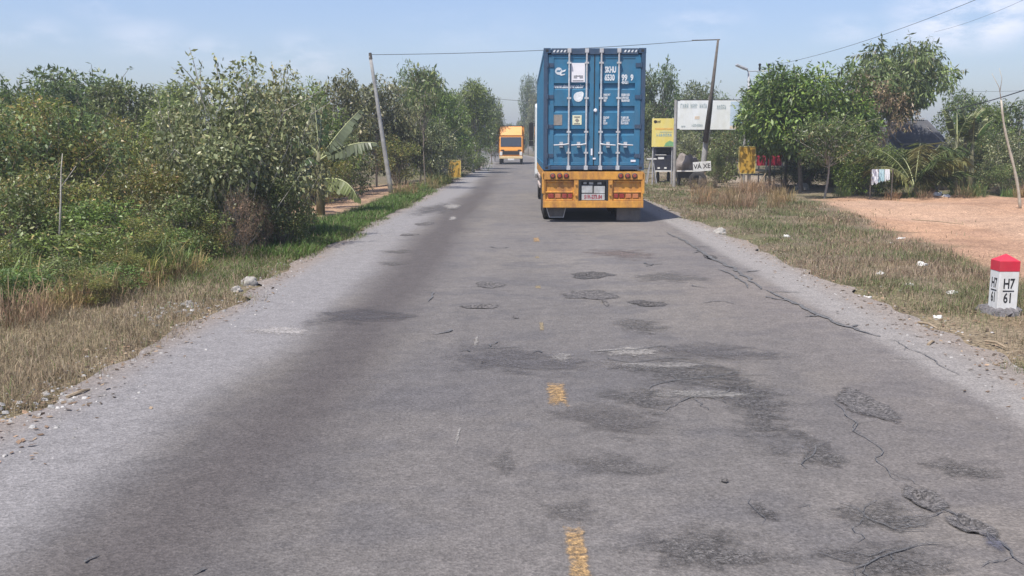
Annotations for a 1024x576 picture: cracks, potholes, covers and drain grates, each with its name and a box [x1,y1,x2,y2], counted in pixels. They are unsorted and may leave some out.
pothole [563,290,619,300]
crack [620,232,881,336]
crack [834,401,919,484]
pothole [945,513,1000,538]
pothole [902,485,949,512]
pothole [572,271,615,279]
pothole [836,387,900,422]
crack [819,500,1023,576]
